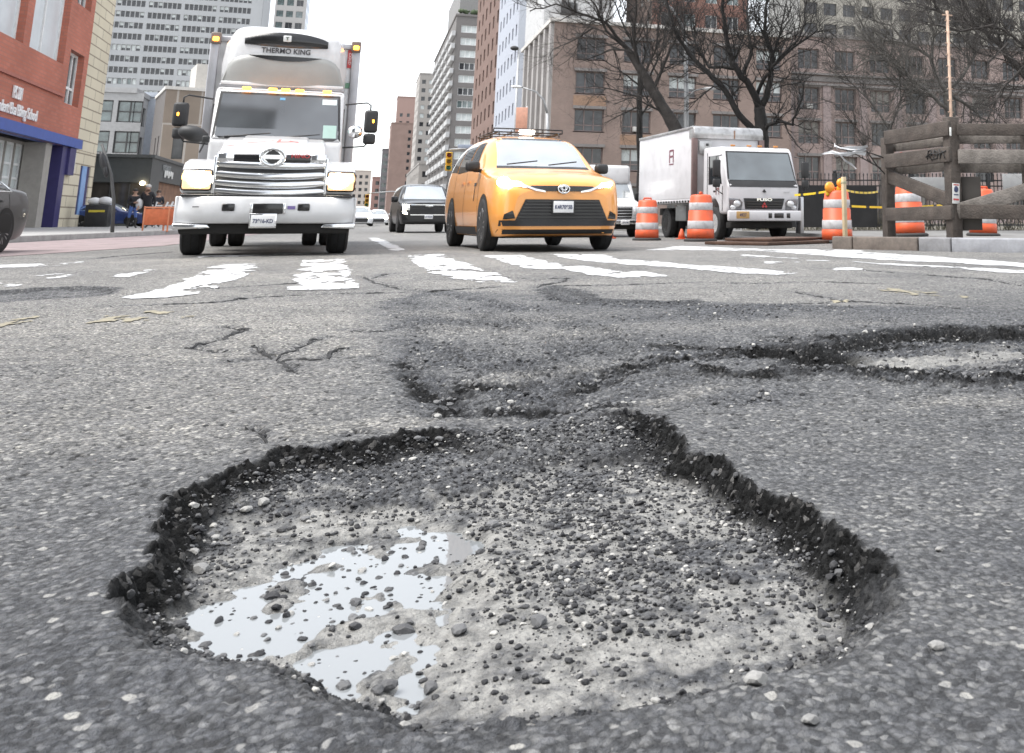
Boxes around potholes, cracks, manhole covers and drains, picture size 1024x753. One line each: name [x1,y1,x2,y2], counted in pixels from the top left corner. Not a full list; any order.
crack [245,426,270,444]
pothole [378,290,669,431]
pothole [774,324,1024,371]
crack [184,326,384,374]
pothole [102,409,913,742]
pothole [730,343,867,368]
